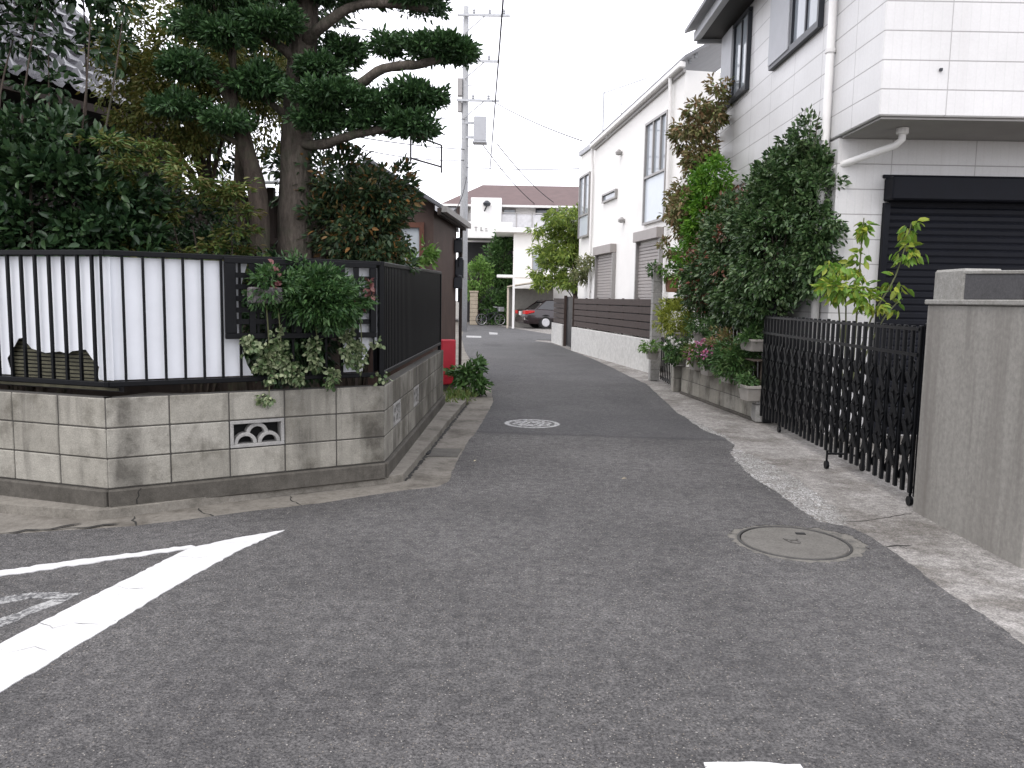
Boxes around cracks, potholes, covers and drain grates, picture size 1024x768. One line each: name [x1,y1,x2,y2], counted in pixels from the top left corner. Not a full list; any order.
manhole cover [727,525,869,563]
manhole cover [503,419,561,428]
